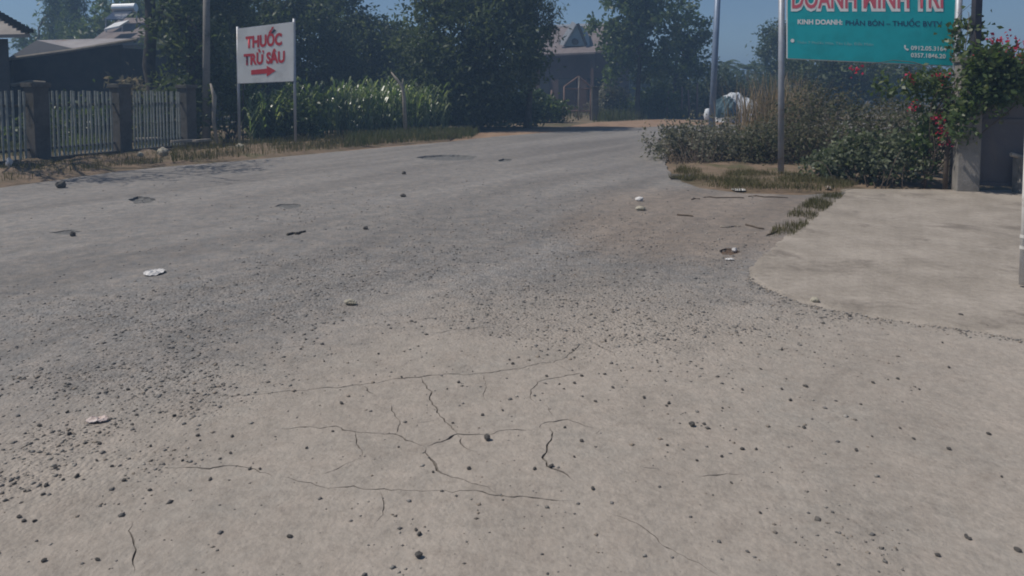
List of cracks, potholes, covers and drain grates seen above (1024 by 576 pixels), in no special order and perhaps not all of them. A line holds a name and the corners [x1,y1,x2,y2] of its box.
crack [179,318,615,522]
crack [610,513,719,576]
pothole [128,196,156,204]
crack [128,525,137,571]
